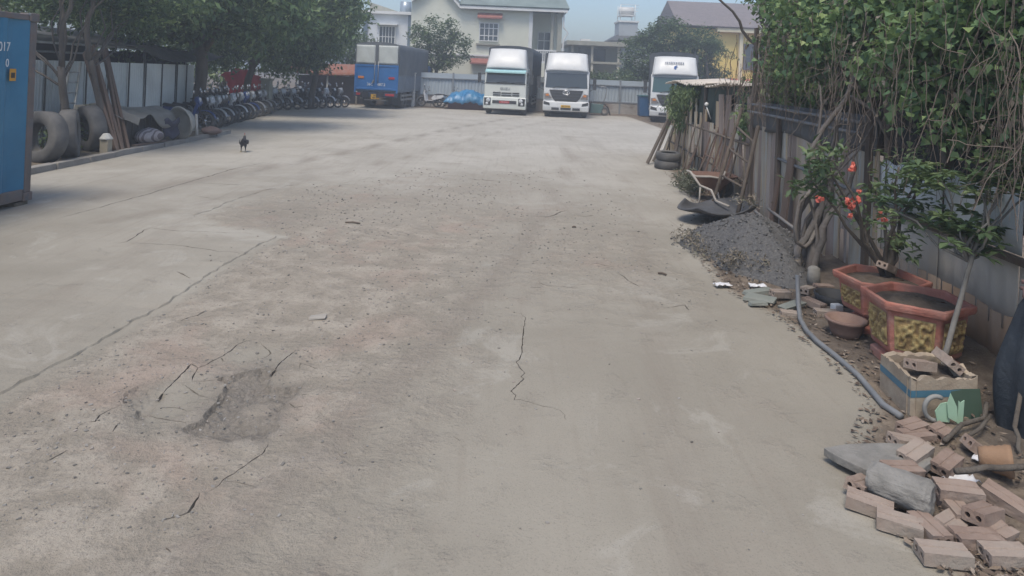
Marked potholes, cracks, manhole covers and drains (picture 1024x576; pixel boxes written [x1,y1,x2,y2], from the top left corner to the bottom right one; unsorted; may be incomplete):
crack [511,316,565,415]
pothole [181,368,303,443]
crack [159,445,268,521]
crack [147,339,316,423]
